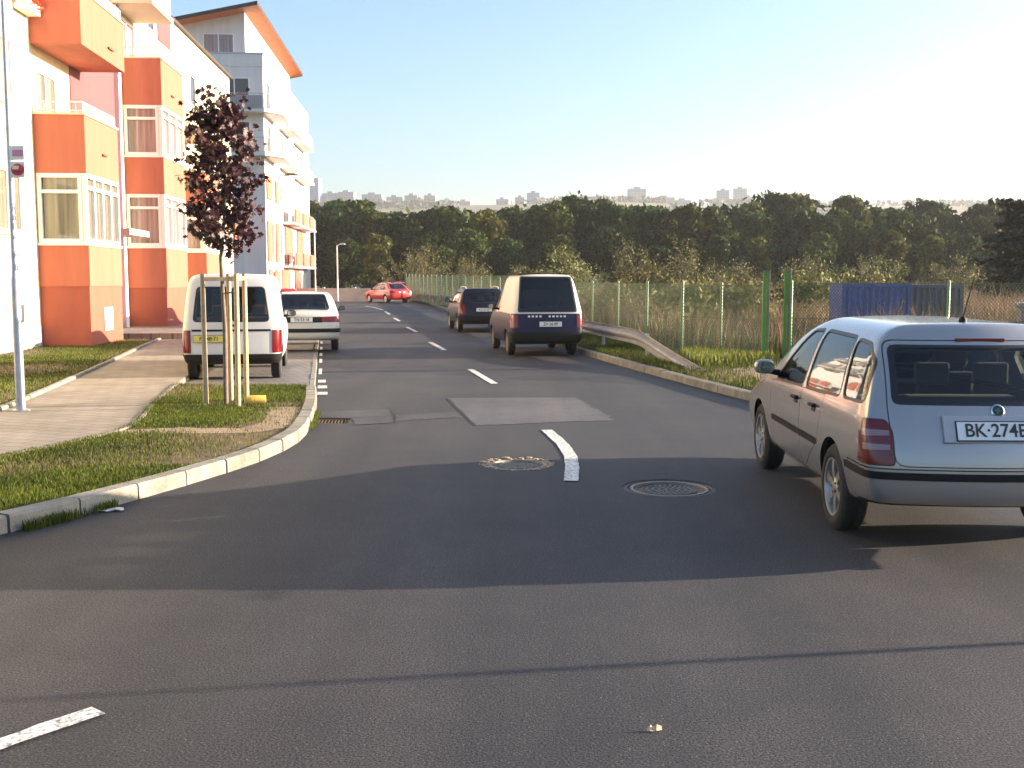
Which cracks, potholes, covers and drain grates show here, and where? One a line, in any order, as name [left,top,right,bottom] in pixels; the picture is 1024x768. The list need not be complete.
manhole cover [623,480,716,497]
manhole cover [479,457,555,471]
